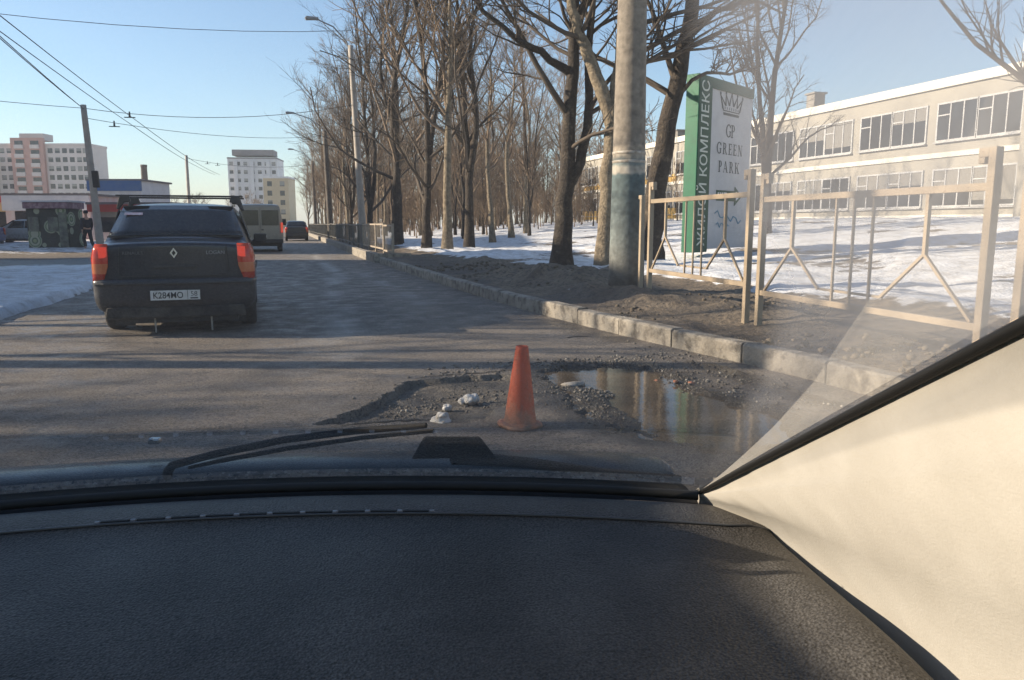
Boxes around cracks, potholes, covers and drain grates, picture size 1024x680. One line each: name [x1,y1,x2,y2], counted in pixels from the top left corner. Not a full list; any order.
pothole [535,362,798,453]
pothole [312,374,511,426]
